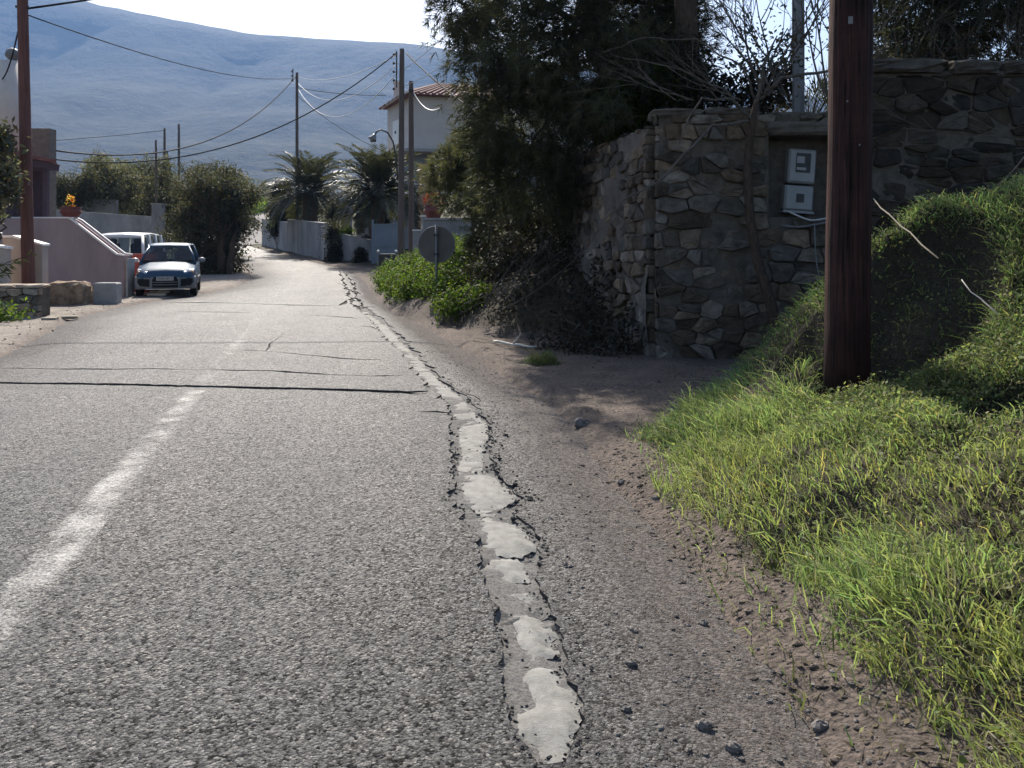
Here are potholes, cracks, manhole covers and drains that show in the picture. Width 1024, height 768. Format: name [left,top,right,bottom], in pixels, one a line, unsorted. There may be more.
crack [0,271,612,768]
